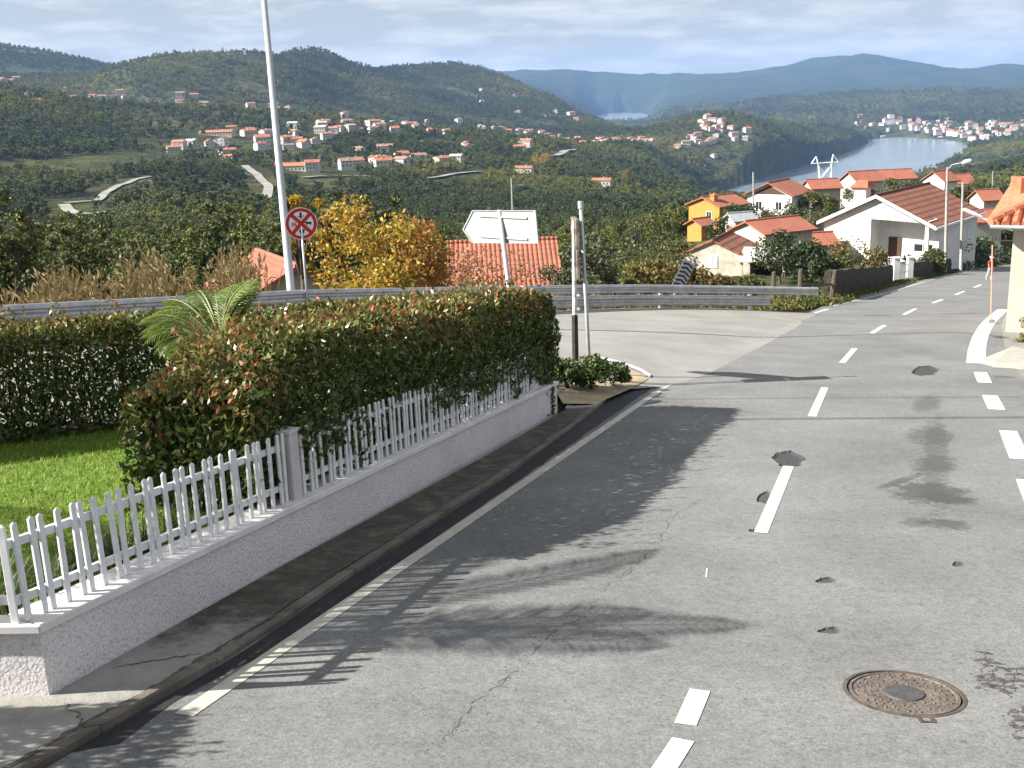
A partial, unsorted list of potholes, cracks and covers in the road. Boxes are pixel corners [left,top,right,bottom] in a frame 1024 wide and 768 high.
pothole [912,365,940,376]
manhole cover [843,670,967,723]
crack [965,645,1024,739]
pothole [817,626,841,634]
pothole [772,450,806,467]
pothole [756,491,770,504]
